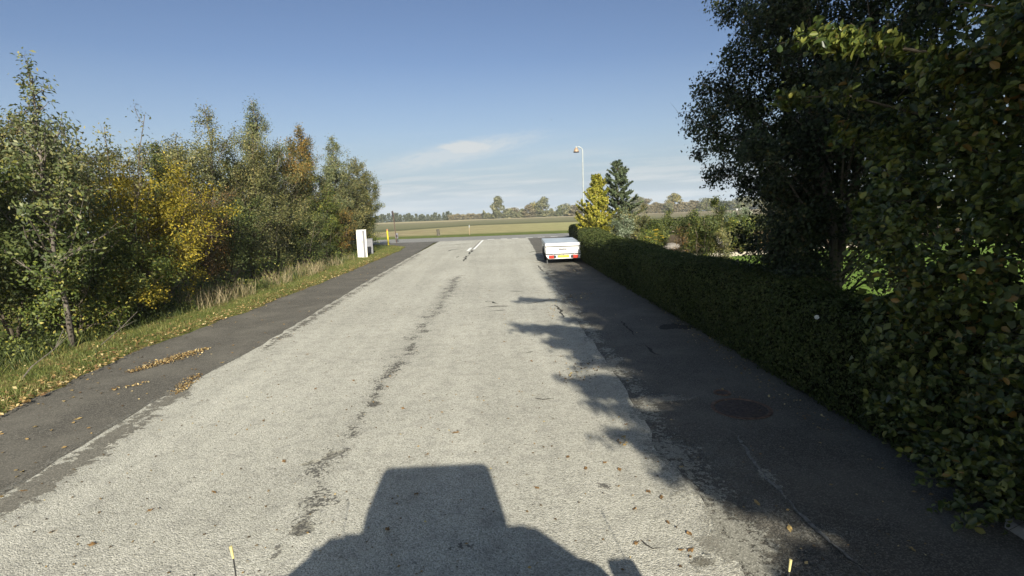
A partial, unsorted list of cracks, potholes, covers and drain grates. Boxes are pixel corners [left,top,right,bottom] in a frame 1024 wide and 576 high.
manhole cover [710,398,773,420]
